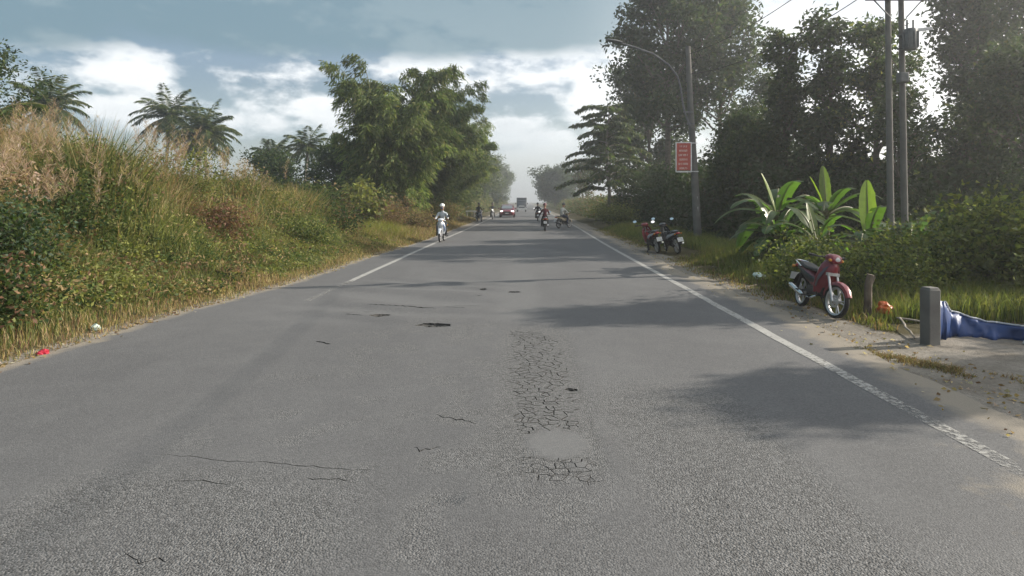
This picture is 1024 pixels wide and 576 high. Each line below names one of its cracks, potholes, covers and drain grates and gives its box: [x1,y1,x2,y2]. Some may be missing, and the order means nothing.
crack [168,454,364,481]
crack [509,332,600,486]
